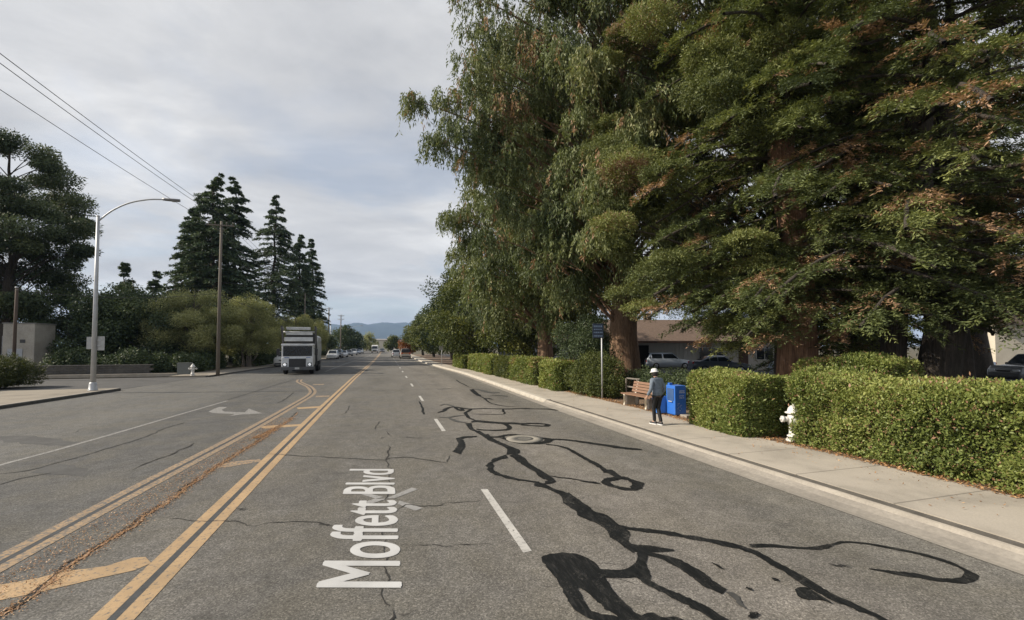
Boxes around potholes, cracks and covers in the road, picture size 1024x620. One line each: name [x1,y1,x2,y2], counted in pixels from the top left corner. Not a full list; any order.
crack [278,421,474,510]
manhole cover [506,435,543,443]
